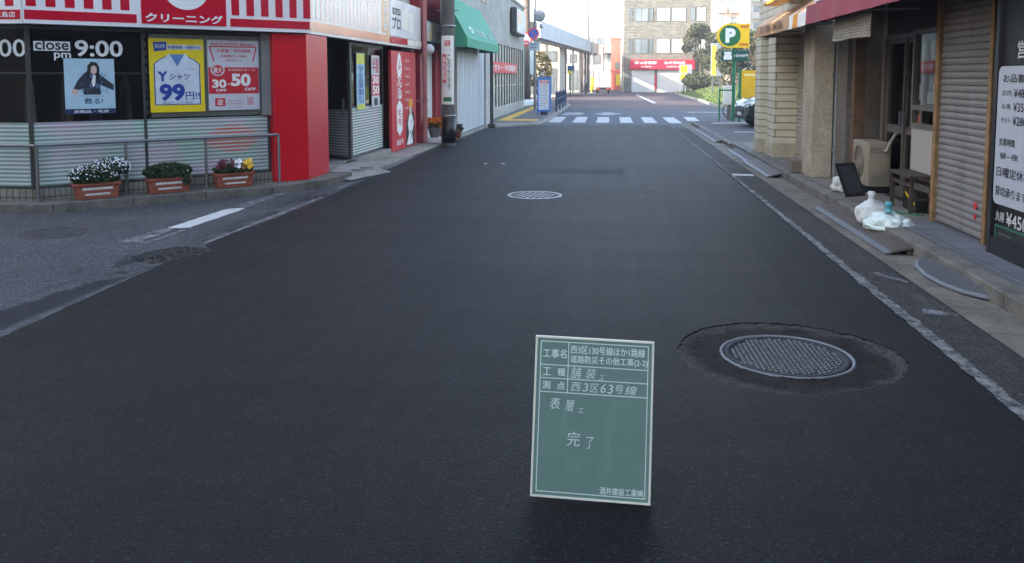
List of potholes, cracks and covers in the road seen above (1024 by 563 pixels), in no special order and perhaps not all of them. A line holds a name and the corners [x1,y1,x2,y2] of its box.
manhole cover [508,191,562,199]
manhole cover [17,227,89,239]
pothole [130,246,213,264]
manhole cover [719,335,857,379]
